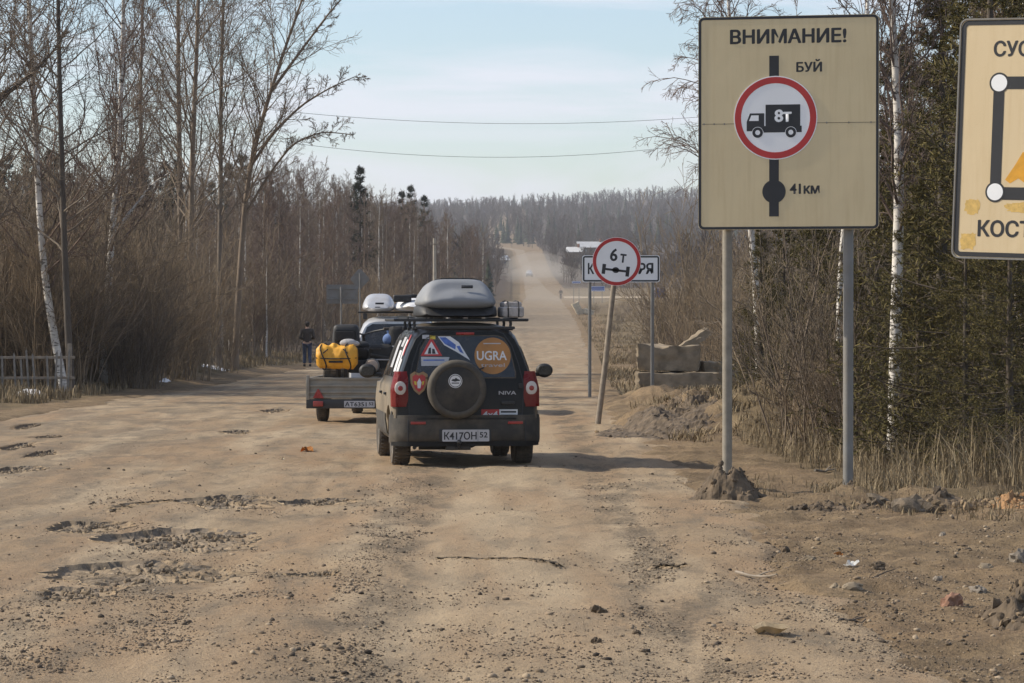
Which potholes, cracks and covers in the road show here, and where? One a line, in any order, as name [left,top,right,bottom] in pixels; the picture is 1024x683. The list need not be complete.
crack [647,562,692,570]
pothole [25,449,57,458]
pothole [277,498,366,507]
pothole [174,494,278,510]
pothole [0,466,50,474]
pothole [36,560,257,587]
pothole [88,527,262,554]
crack [435,556,564,568]
pothole [46,521,138,534]
pothole [0,442,32,451]
